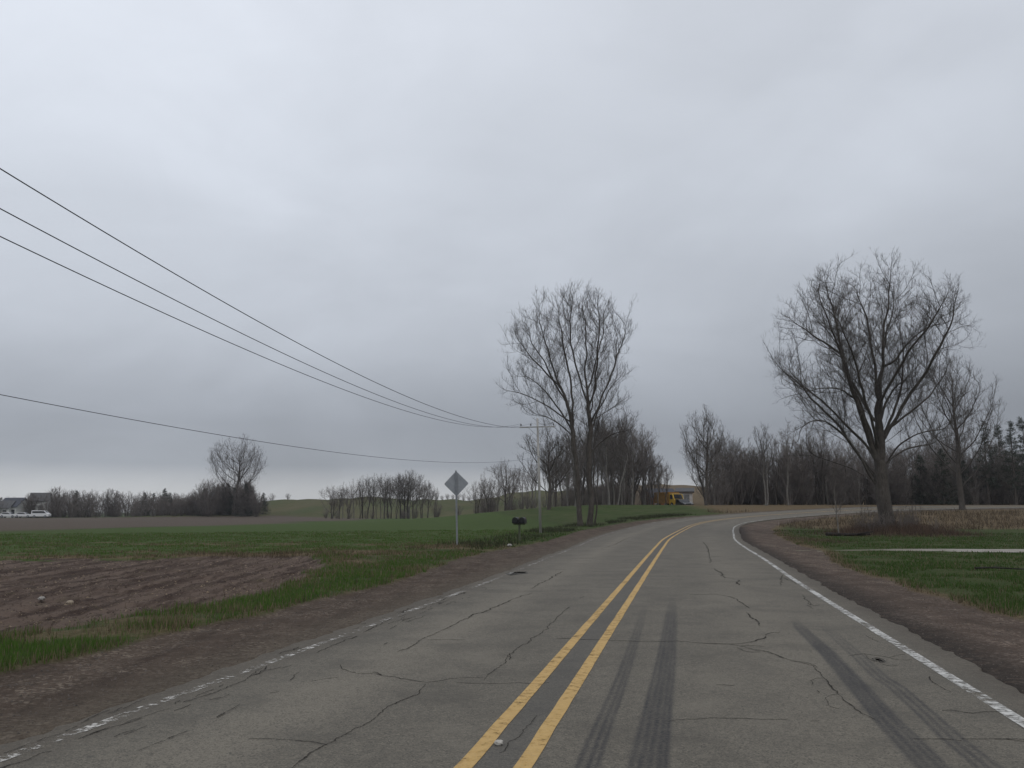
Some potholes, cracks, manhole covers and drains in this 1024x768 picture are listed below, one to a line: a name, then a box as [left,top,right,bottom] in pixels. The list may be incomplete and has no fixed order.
crack [0,545,874,768]
